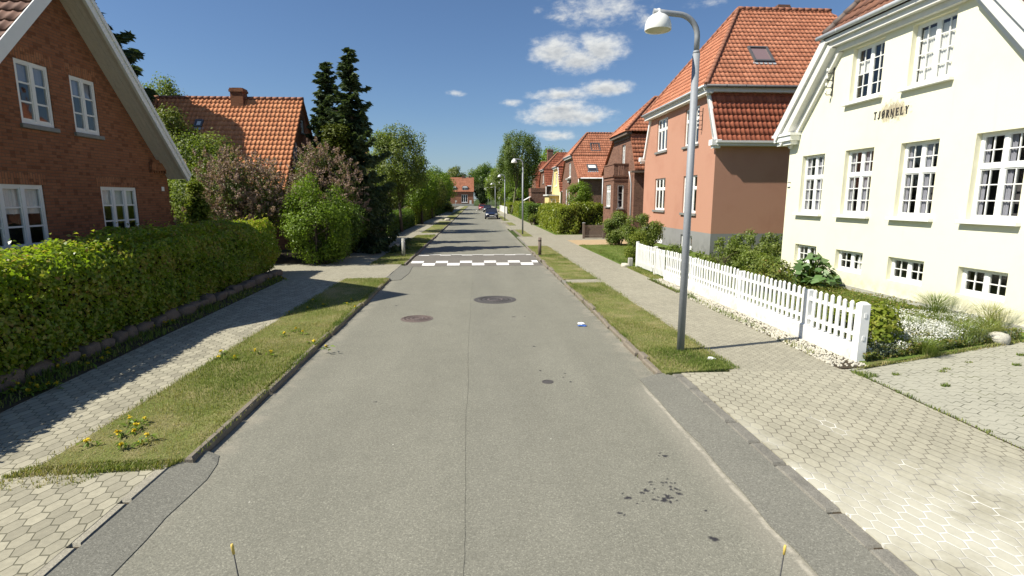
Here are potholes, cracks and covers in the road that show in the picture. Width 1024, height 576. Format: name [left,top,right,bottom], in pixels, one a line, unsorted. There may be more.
manhole cover [474,296,516,304]
